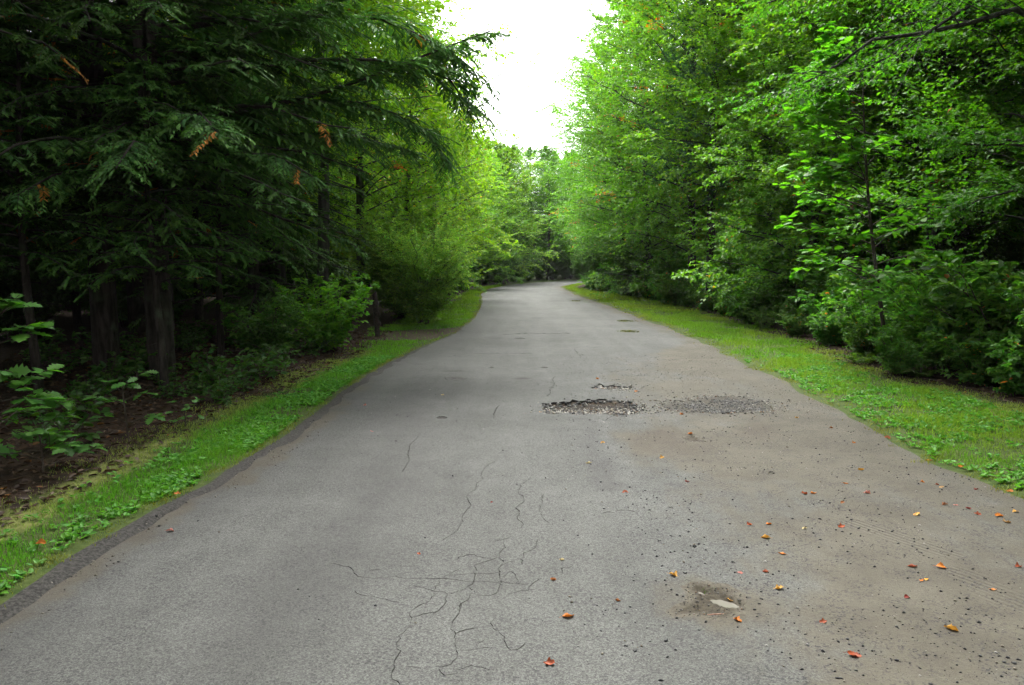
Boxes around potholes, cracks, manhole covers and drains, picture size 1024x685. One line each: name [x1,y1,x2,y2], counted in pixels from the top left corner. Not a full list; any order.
pothole [541,399,645,415]
pothole [658,397,771,413]
crack [330,478,548,685]
pothole [665,580,747,621]
pothole [591,383,631,391]
